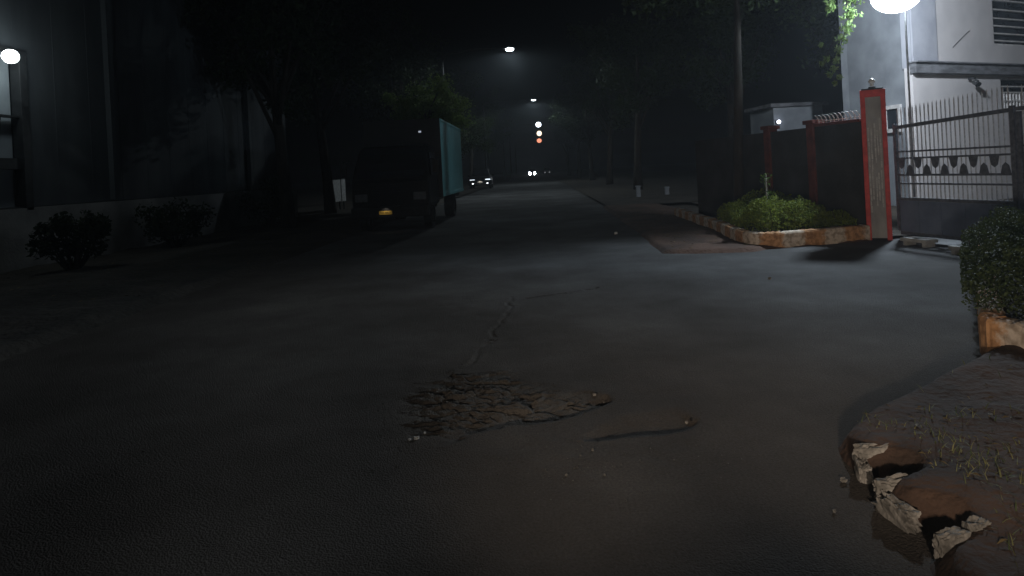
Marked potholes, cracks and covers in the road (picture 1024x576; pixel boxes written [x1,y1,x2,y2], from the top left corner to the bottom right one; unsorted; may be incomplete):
pothole [372,368,622,455]
crack [451,286,604,371]
